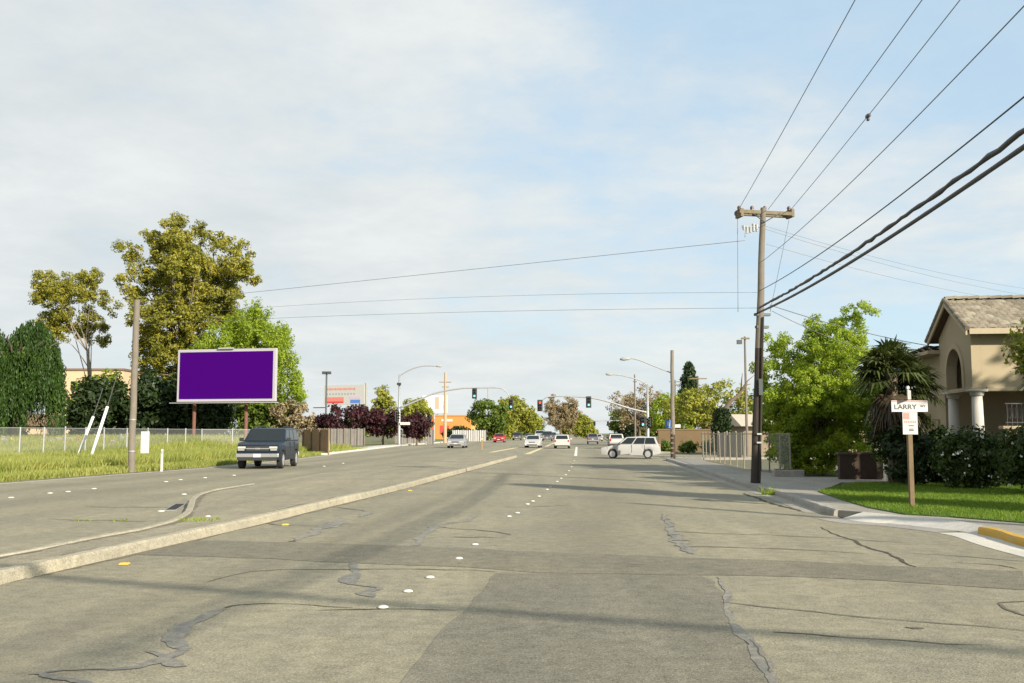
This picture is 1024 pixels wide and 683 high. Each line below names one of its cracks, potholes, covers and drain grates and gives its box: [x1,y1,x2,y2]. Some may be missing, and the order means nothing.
crack [267,507,372,526]
crack [669,527,1019,569]
crack [998,601,1024,615]
